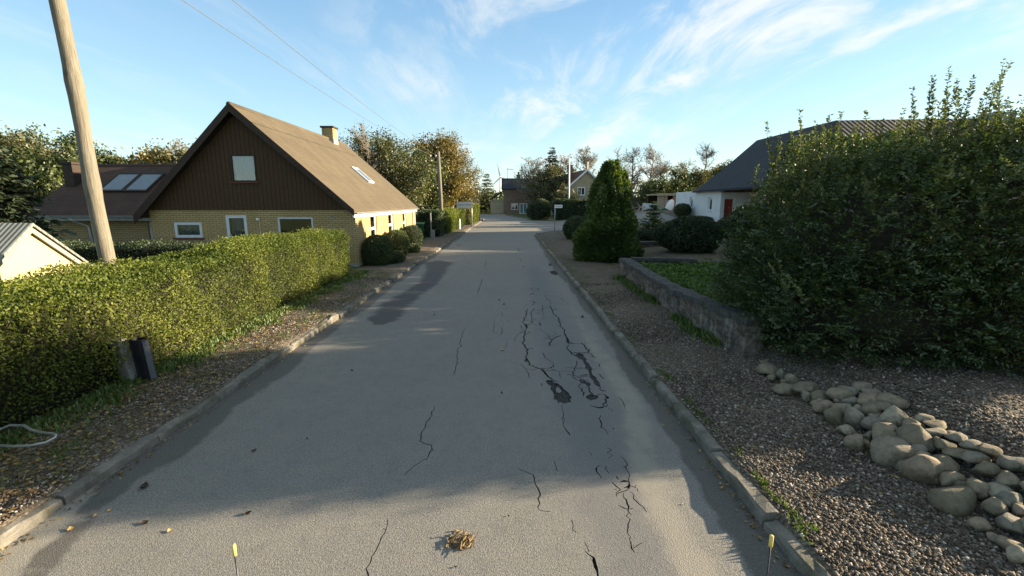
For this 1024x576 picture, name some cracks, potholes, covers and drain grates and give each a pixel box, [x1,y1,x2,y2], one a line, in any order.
pothole [546,380,572,404]
crack [572,521,599,576]
crack [493,290,646,553]
crack [366,520,388,576]
crack [404,407,435,475]
